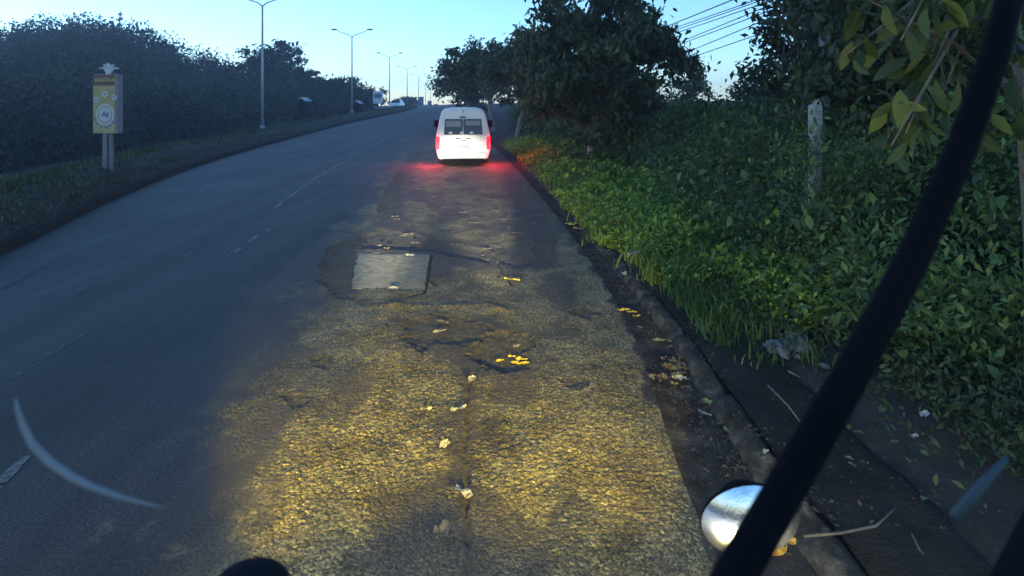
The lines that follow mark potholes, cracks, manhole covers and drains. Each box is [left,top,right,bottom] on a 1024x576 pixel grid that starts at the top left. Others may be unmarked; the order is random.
pothole [463,328,537,374]
crack [408,254,438,297]
crack [496,261,514,286]
crack [458,372,475,576]
pothole [279,389,317,409]
pothole [400,311,498,354]
